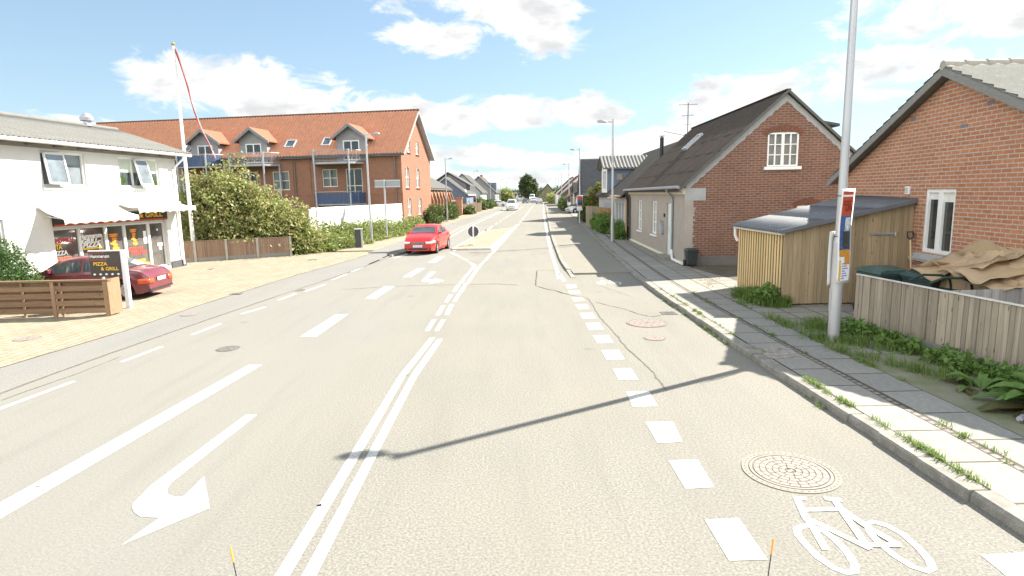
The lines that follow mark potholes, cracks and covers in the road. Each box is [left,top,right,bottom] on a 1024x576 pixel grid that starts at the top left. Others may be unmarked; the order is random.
manhole cover [626,319,668,328]
manhole cover [741,451,842,494]
